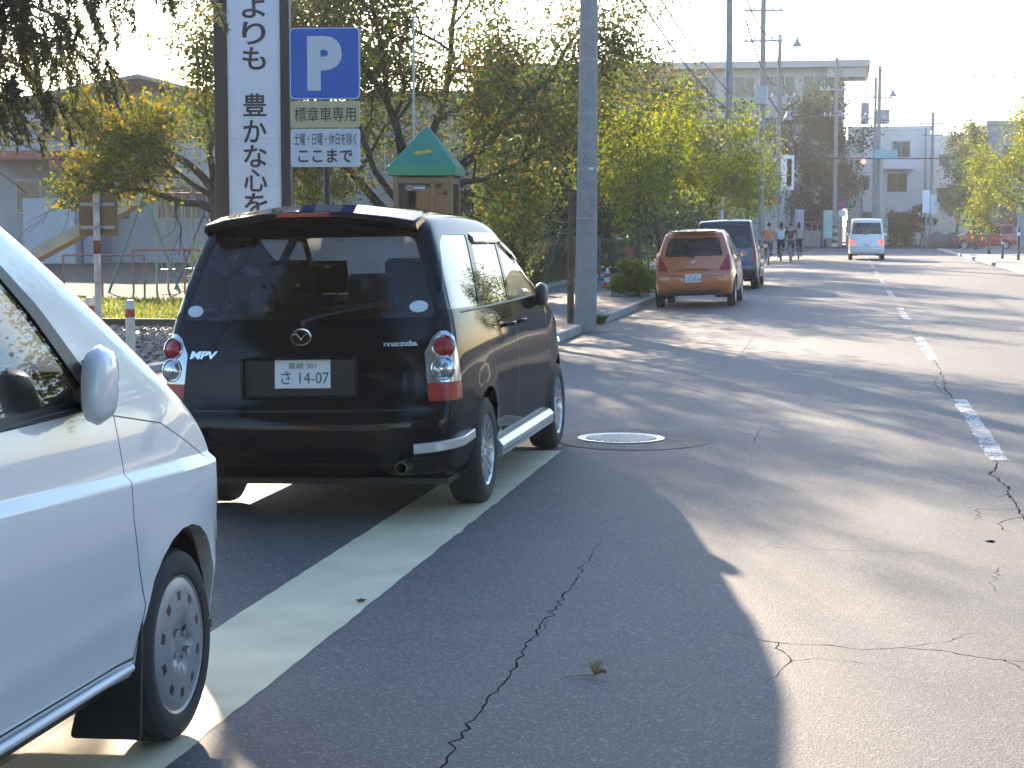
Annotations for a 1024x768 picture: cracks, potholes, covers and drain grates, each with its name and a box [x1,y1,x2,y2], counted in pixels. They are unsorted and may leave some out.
crack [710,630,1023,682]
crack [440,540,602,768]
crack [909,328,1024,532]
manhole cover [578,433,665,444]
